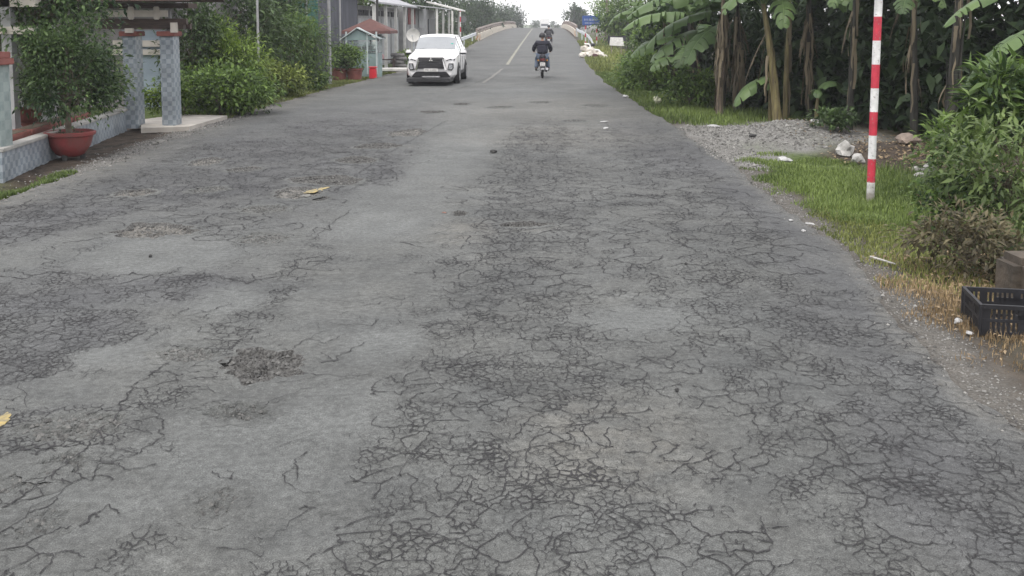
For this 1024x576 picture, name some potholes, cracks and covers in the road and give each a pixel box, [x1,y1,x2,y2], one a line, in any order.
crack [257,119,1024,576]
crack [79,504,120,527]
pothole [265,186,329,201]
pothole [184,396,285,427]
crack [106,439,328,576]
crack [0,113,424,462]
pothole [99,221,207,241]
pothole [206,344,318,391]
